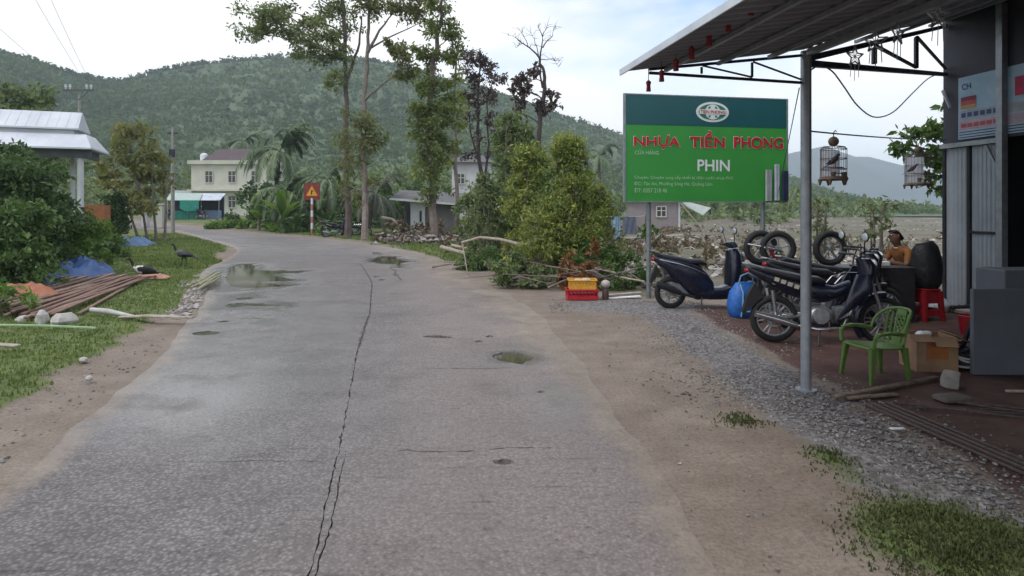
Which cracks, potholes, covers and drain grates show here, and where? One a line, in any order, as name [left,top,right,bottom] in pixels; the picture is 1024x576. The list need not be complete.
pothole [368,256,412,268]
pothole [226,264,306,288]
pothole [492,352,534,364]
